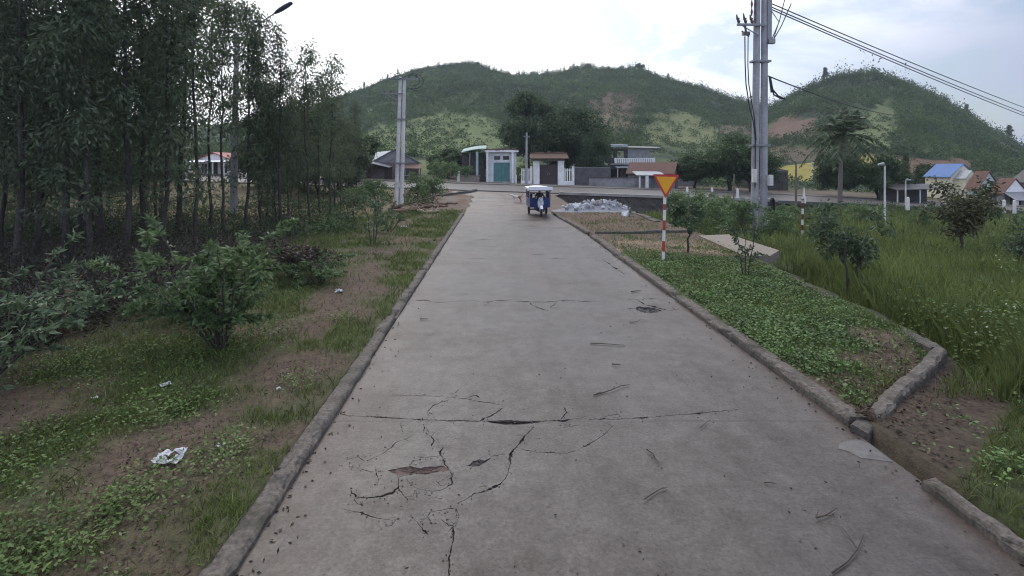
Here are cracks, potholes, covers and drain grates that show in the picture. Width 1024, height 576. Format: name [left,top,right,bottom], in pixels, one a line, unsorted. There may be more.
pothole [388,466,449,476]
crack [417,300,589,310]
pothole [636,306,661,314]
crack [340,388,738,576]
